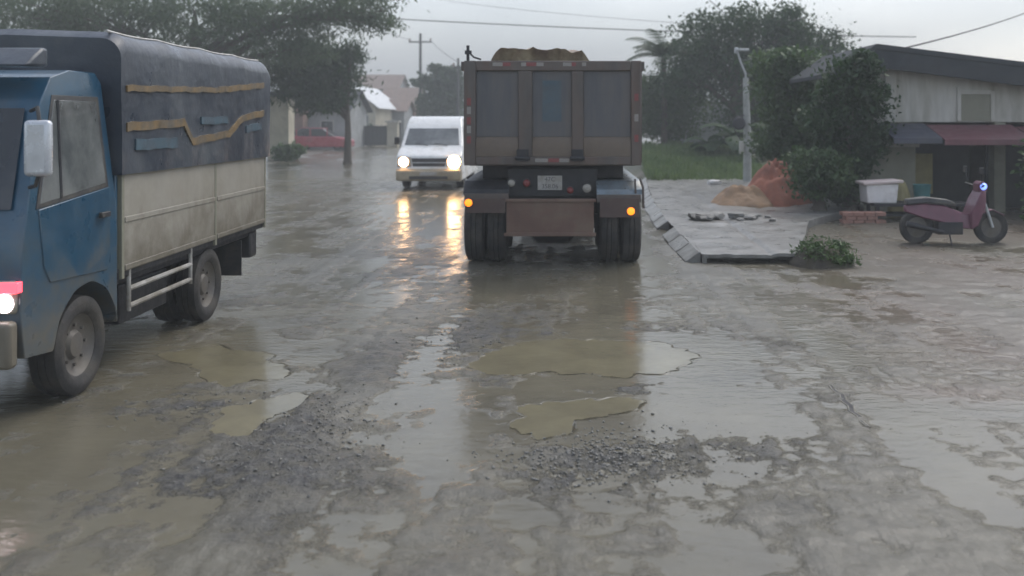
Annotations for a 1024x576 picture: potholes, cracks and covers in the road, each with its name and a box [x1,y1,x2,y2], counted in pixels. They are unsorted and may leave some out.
pothole [464,338,700,378]
pothole [508,397,646,440]
pothole [157,344,290,388]
crack [828,385,871,427]
pothole [208,392,309,436]
